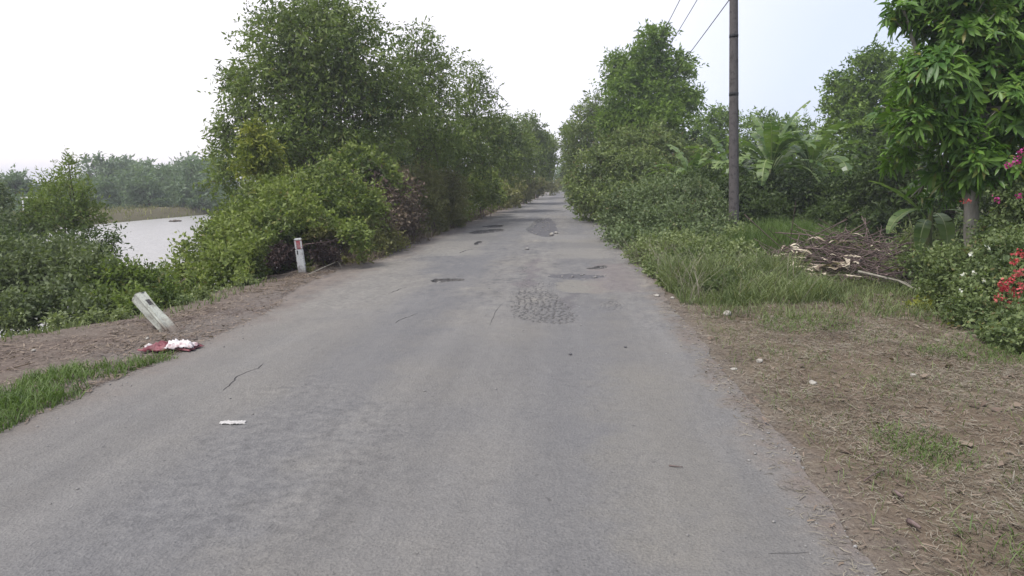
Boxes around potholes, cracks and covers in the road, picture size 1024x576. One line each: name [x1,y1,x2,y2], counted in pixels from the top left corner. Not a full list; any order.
pothole [526,217,560,237]
crack [490,264,630,325]
